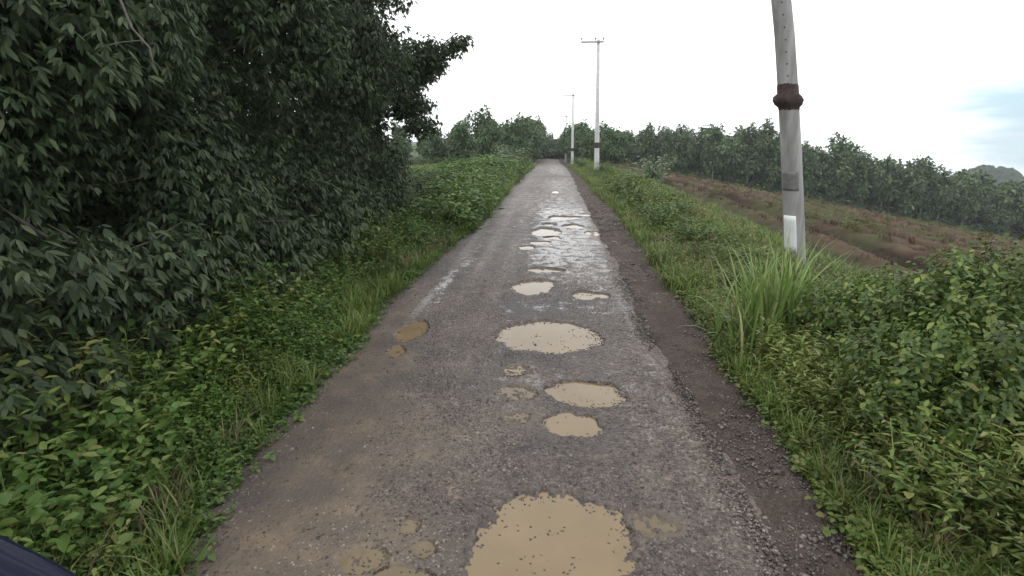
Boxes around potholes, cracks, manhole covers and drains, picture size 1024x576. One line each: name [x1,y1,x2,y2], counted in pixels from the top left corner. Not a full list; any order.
pothole [540,410,604,437]
pothole [529,227,562,237]
pothole [543,379,629,408]
pothole [506,278,557,297]
pothole [457,488,648,576]
pothole [398,516,423,536]
pothole [412,539,439,560]
pothole [491,319,607,355]
pothole [626,508,687,539]
pothole [493,383,541,401]
pothole [385,344,407,358]
pothole [570,289,611,300]
